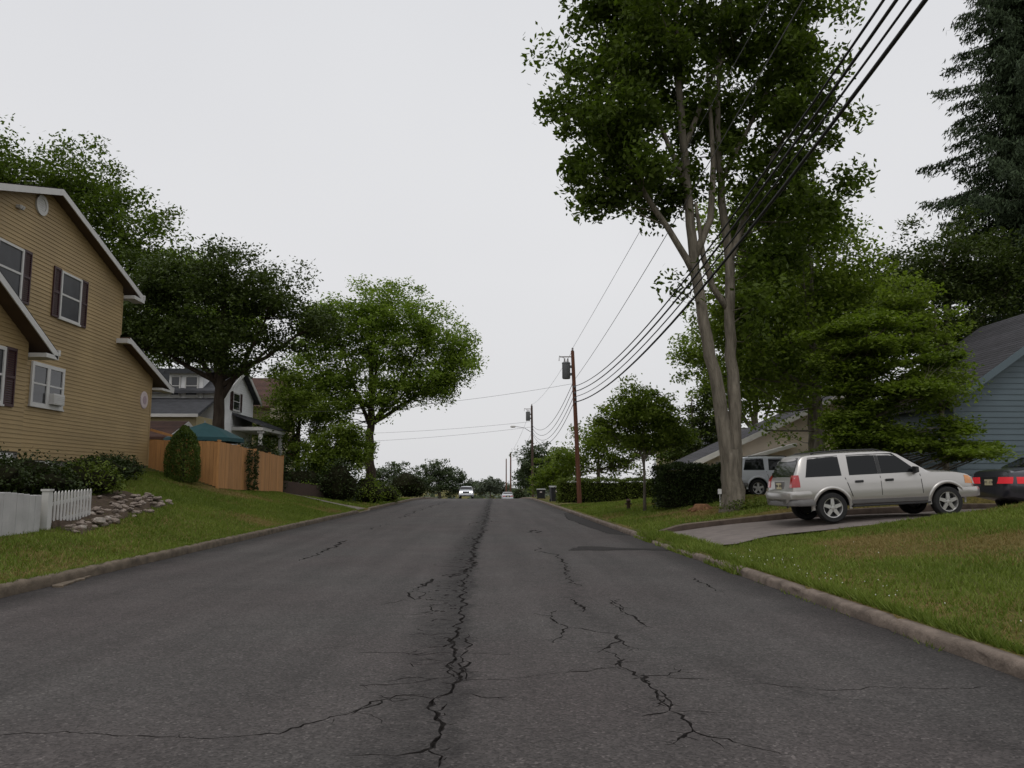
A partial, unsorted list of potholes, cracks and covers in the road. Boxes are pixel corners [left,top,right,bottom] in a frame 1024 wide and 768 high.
crack [5,500,514,768]
crack [522,530,782,755]
